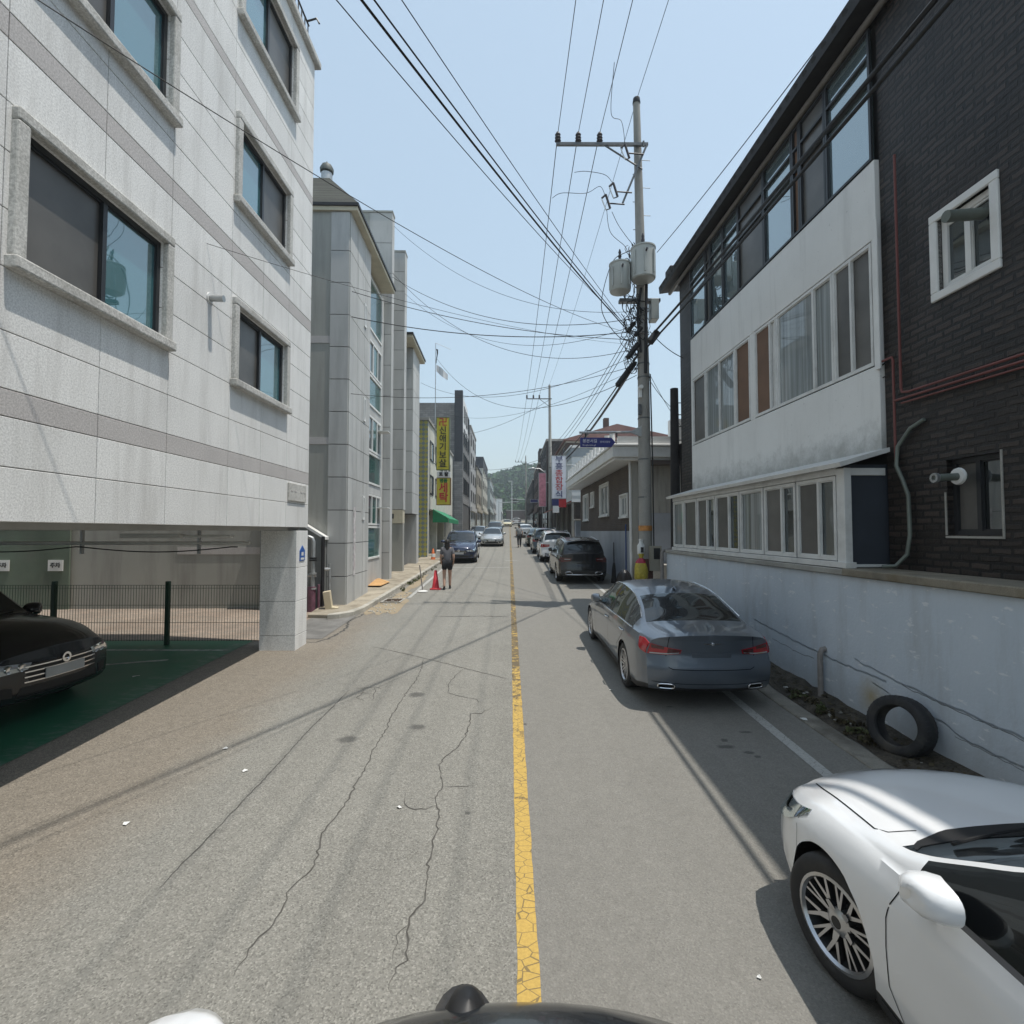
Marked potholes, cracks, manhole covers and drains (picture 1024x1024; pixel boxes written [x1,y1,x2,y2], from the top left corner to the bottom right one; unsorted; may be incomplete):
crack [234,647,502,990]
